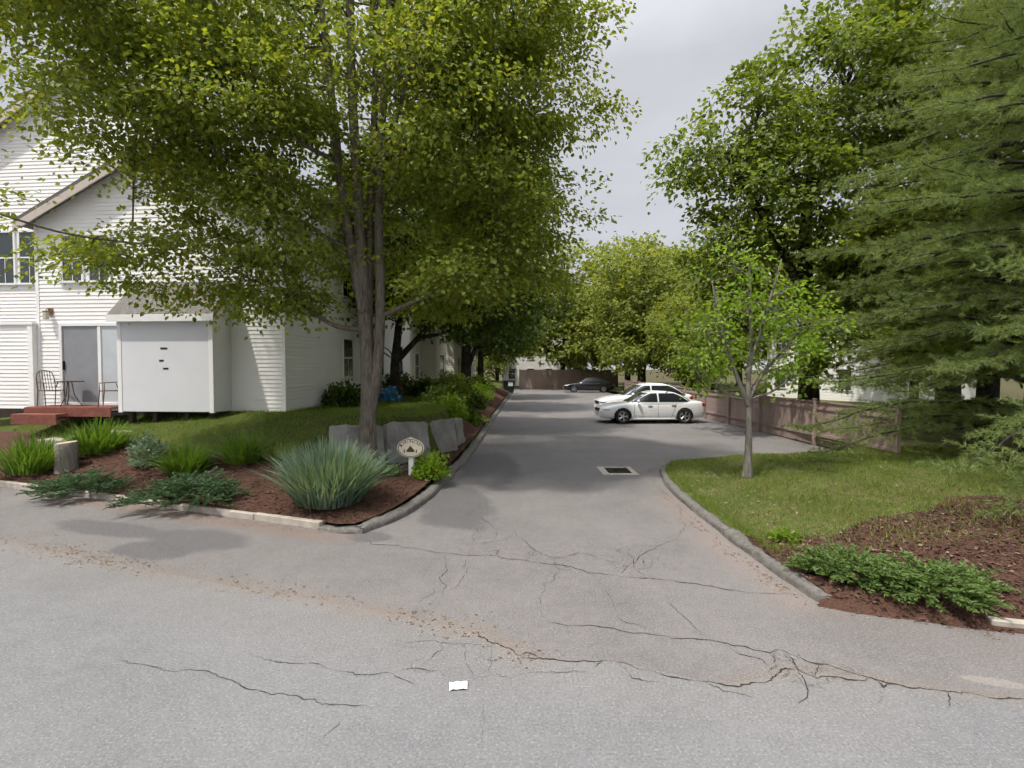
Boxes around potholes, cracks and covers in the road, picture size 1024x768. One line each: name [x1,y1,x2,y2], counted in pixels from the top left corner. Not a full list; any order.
crack [135,663,374,737]
drain grate [597,467,639,475]
crack [251,588,1023,741]
crack [365,491,789,613]
